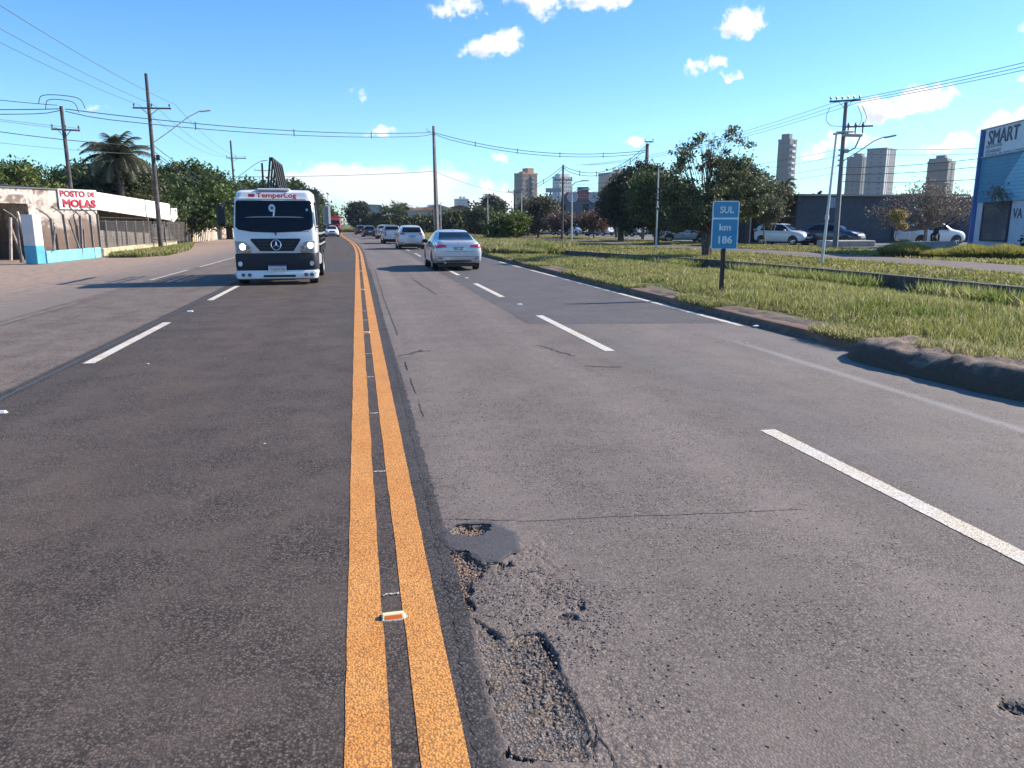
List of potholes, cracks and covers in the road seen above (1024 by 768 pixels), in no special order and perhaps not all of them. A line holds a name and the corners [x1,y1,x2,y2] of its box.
pothole [451,526,489,537]
pothole [450,552,489,612]
pothole [996,703,1024,716]
crack [400,349,424,416]
pothole [476,621,589,763]
crack [539,345,620,367]
